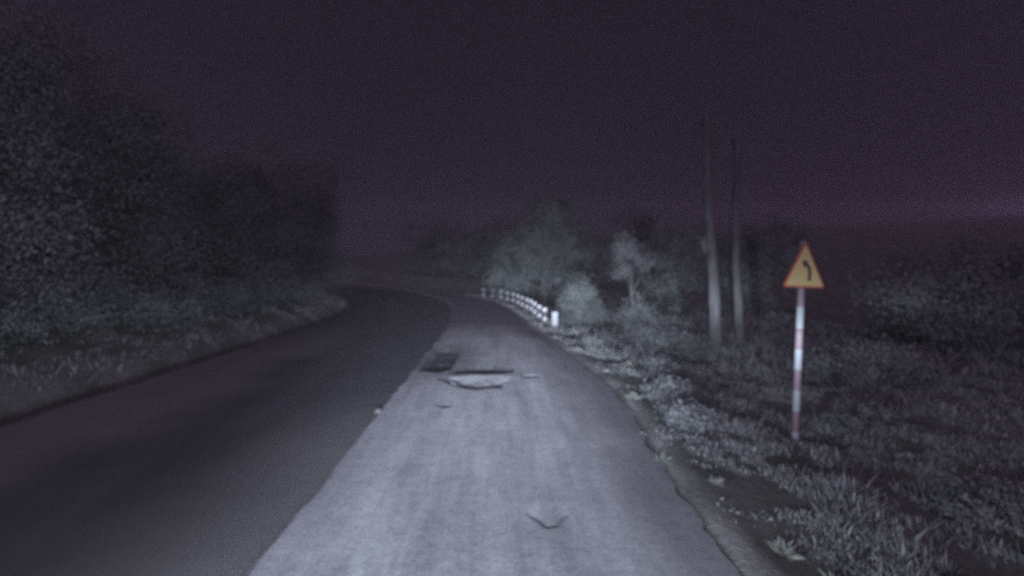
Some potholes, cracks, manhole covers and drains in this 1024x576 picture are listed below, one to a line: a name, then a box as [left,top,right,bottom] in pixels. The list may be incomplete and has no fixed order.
pothole [448,365,514,375]
pothole [418,348,460,373]
pothole [448,375,510,390]
